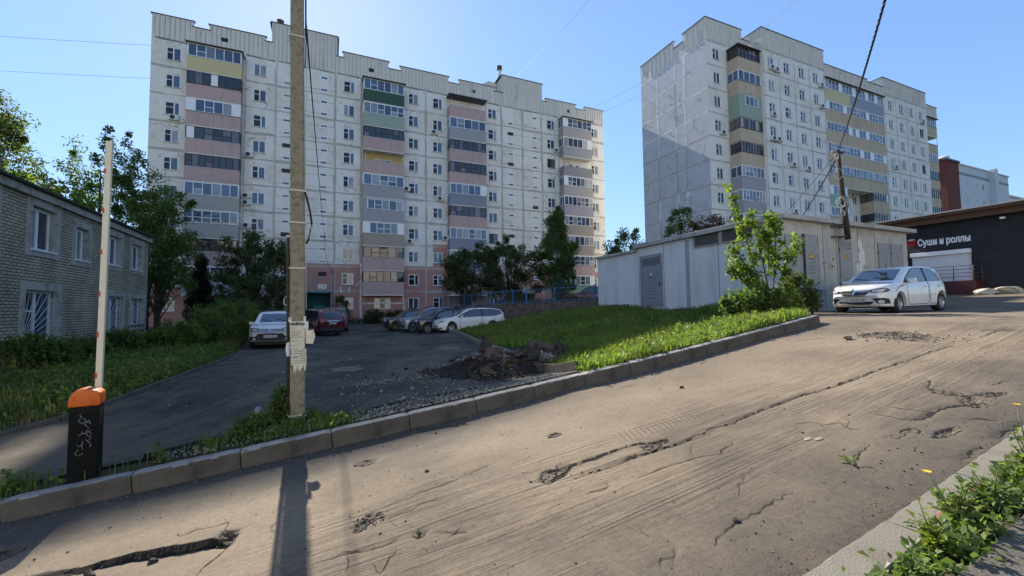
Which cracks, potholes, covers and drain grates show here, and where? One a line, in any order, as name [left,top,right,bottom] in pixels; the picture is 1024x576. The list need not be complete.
pothole [930,425,961,439]
pothole [352,511,384,533]
crack [878,380,1023,439]
pothole [858,331,936,342]
crack [550,346,952,494]
crack [714,491,793,545]
